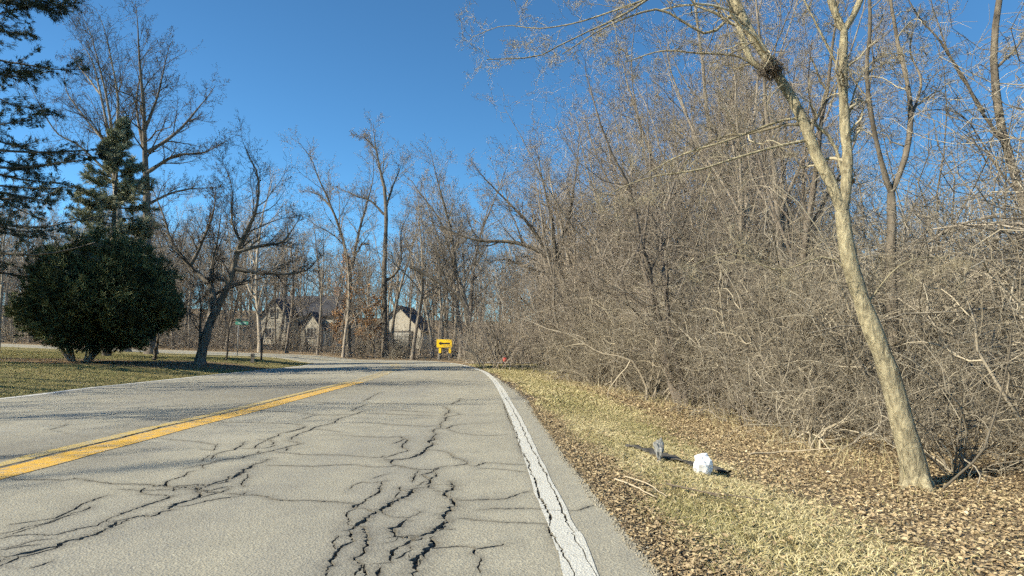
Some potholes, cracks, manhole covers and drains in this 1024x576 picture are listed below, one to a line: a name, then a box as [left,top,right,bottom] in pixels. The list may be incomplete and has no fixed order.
crack [0,393,594,576]
